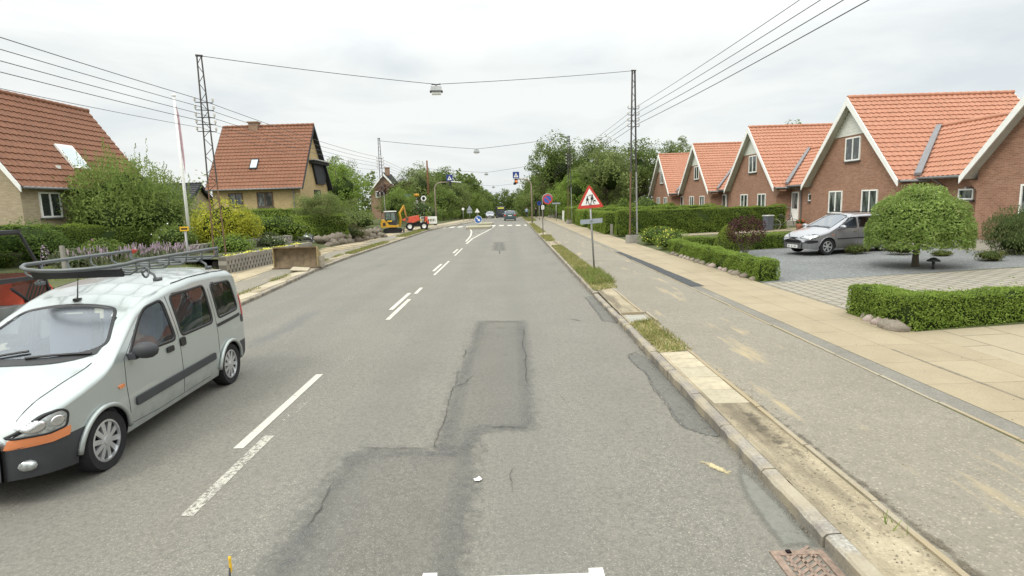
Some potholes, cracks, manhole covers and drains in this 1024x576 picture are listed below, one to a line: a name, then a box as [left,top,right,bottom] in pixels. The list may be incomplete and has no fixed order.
crack [372,350,469,449]
drain grate [769,545,846,576]
crack [307,483,333,526]
